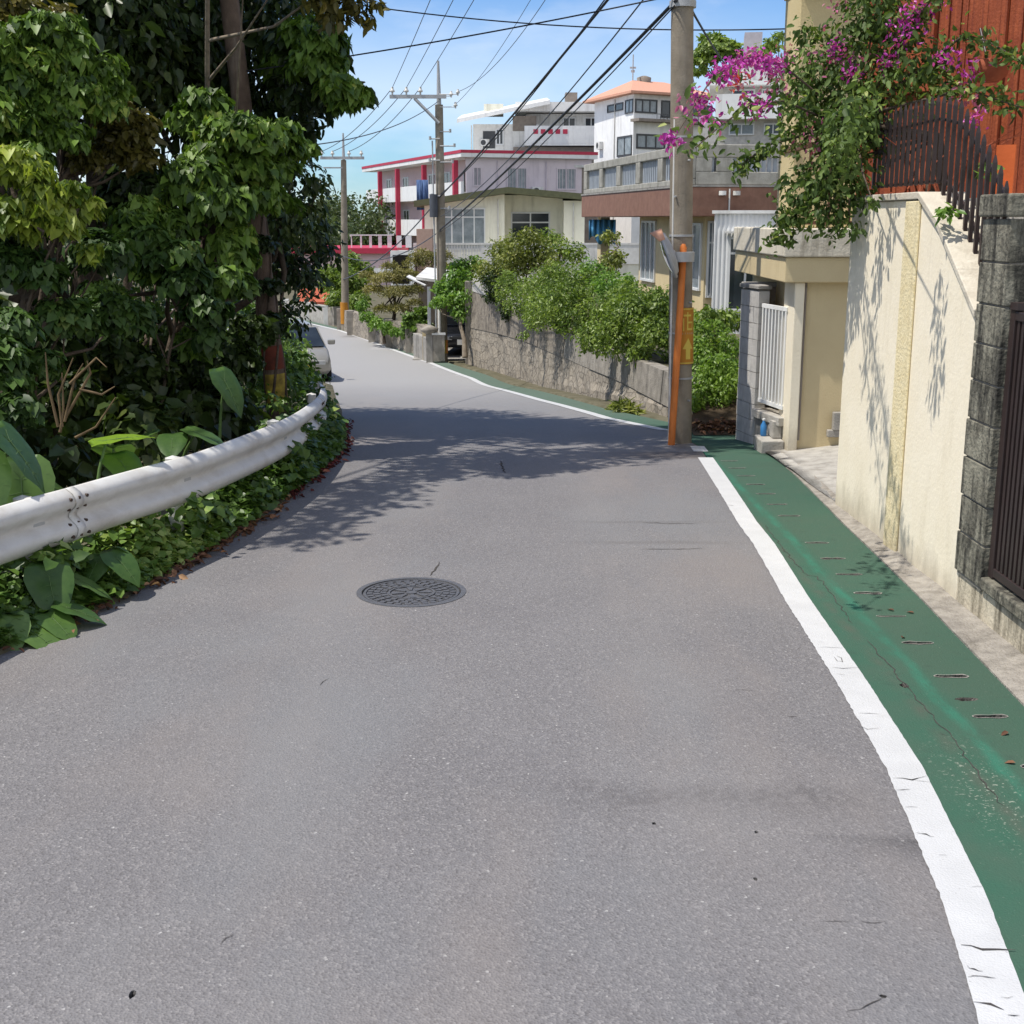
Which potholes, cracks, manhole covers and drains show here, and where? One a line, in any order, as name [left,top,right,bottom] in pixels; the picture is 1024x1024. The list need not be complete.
crack [766,528,852,623]
crack [835,640,1003,805]
manhole cover [356,577,466,607]
